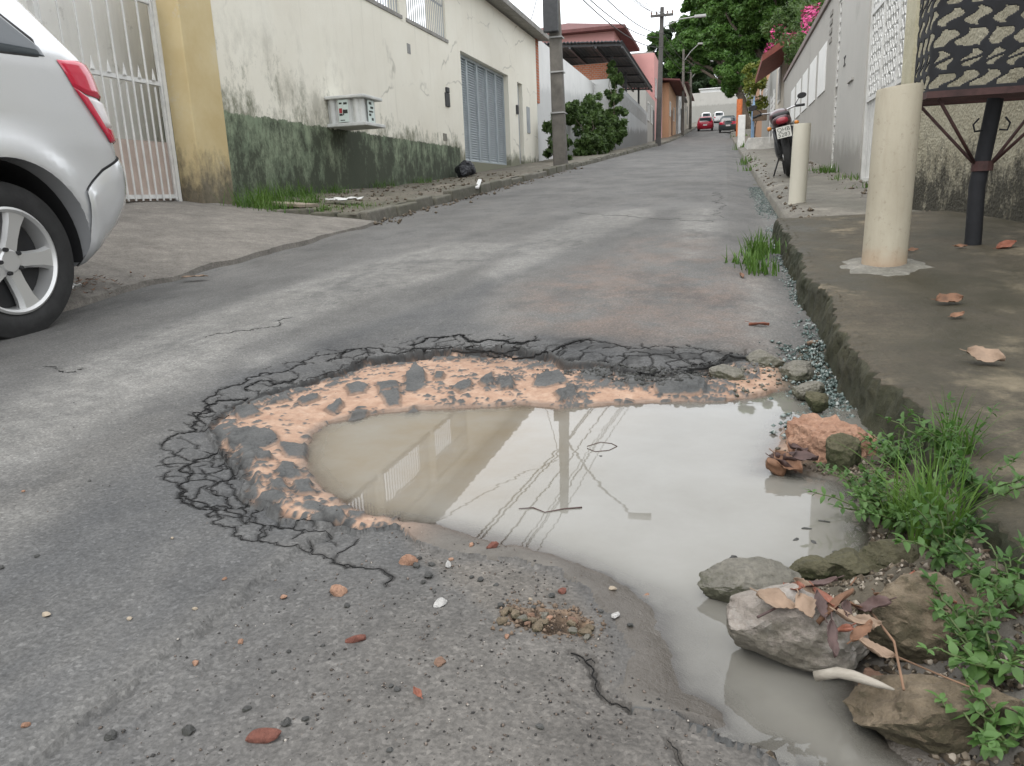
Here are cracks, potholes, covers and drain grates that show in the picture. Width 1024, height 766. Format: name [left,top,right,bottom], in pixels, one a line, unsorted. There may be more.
crack [42,317,292,373]
crack [571,653,630,711]
crack [155,333,524,587]
